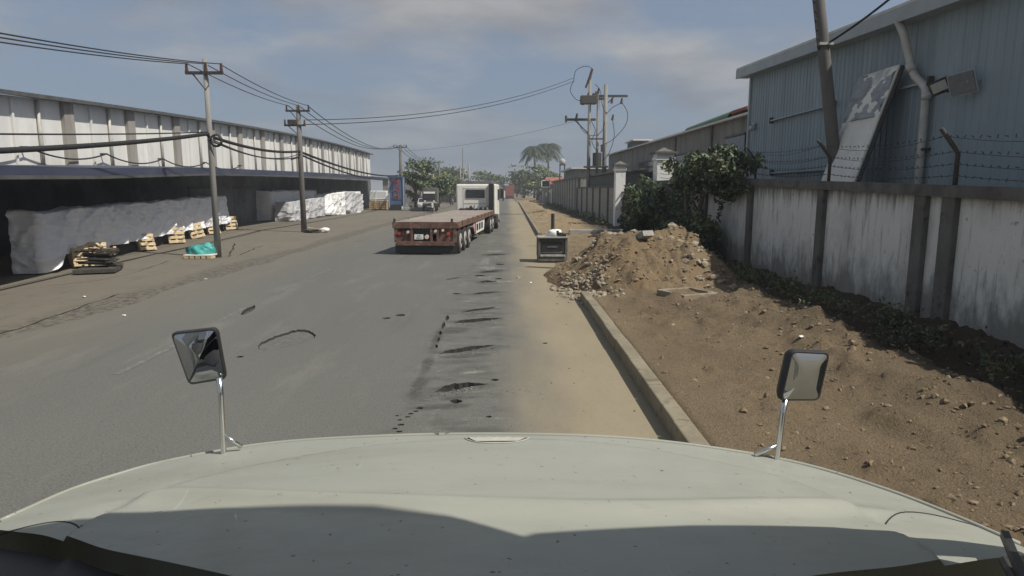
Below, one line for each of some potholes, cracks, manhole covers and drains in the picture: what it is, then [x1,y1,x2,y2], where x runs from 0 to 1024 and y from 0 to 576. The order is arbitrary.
pothole [440,345,493,354]
pothole [435,382,485,392]
